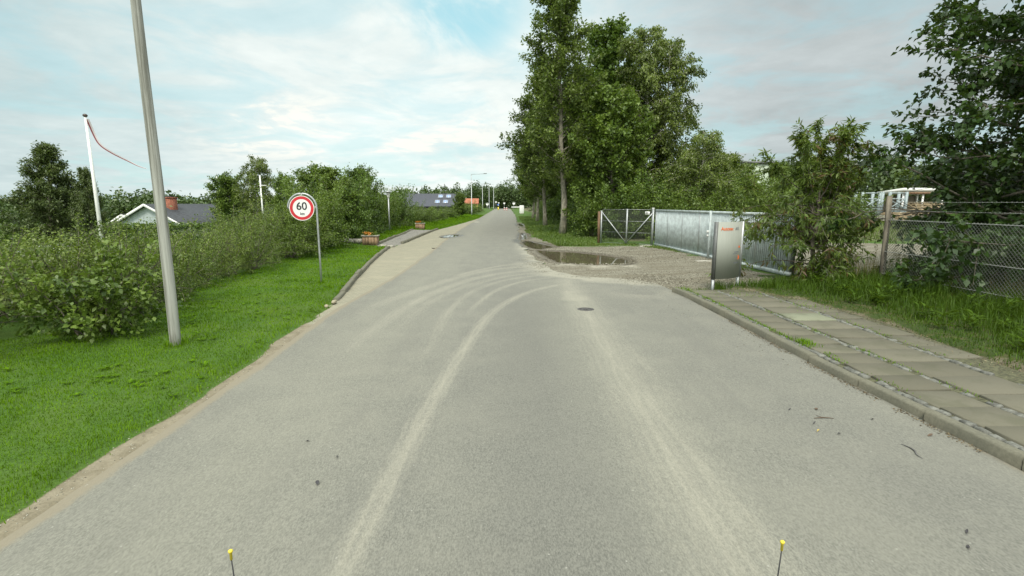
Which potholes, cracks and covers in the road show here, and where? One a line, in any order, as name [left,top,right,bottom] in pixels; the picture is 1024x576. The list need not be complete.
pothole [532,250,632,265]
